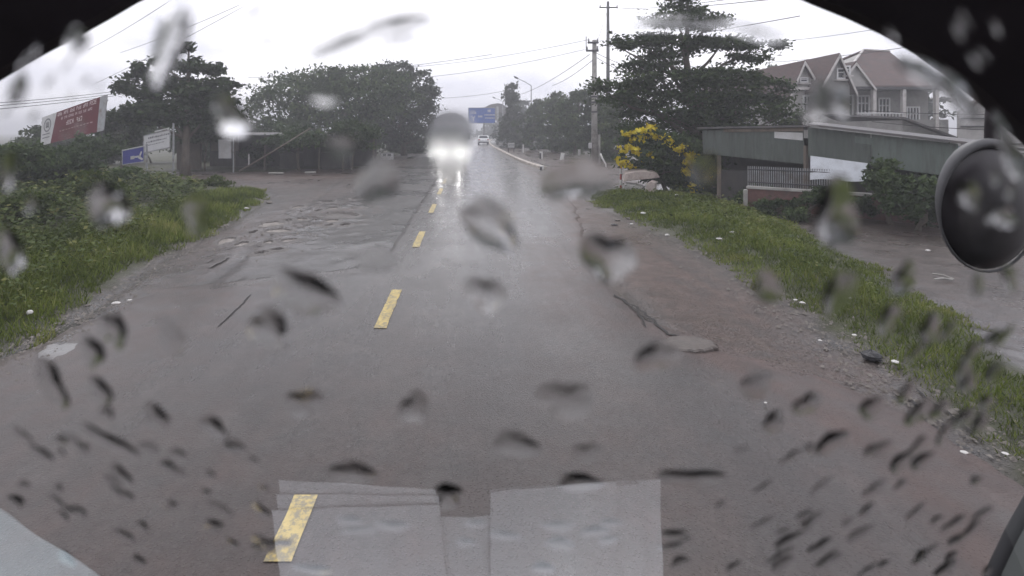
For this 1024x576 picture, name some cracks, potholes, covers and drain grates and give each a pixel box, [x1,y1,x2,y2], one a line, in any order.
pothole [254,220,292,228]
crack [614,294,676,335]
crack [218,294,251,327]
pothole [212,237,240,246]
